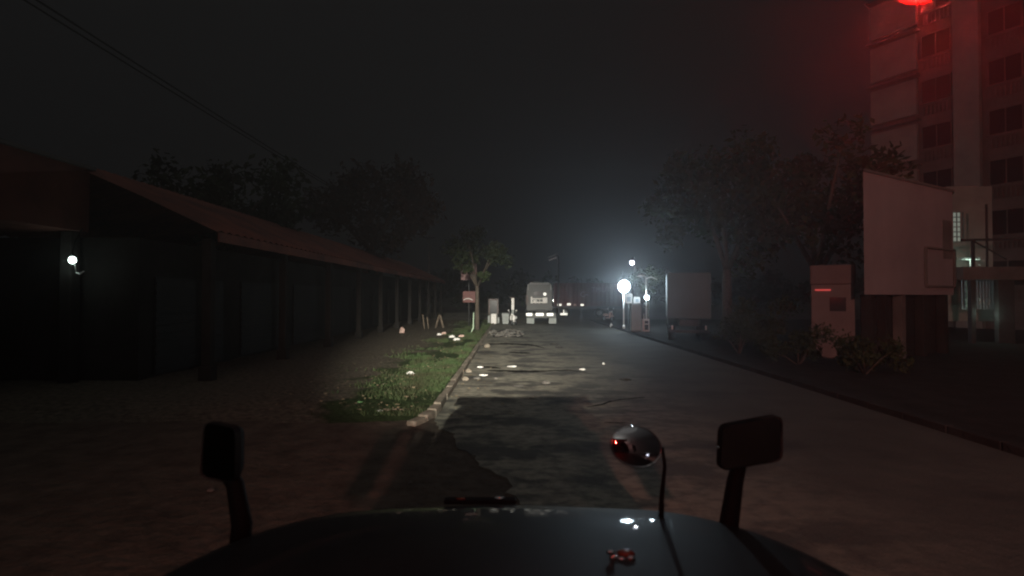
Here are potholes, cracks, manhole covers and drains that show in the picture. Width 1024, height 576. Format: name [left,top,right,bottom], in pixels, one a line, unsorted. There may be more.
crack [589,397,644,423]
